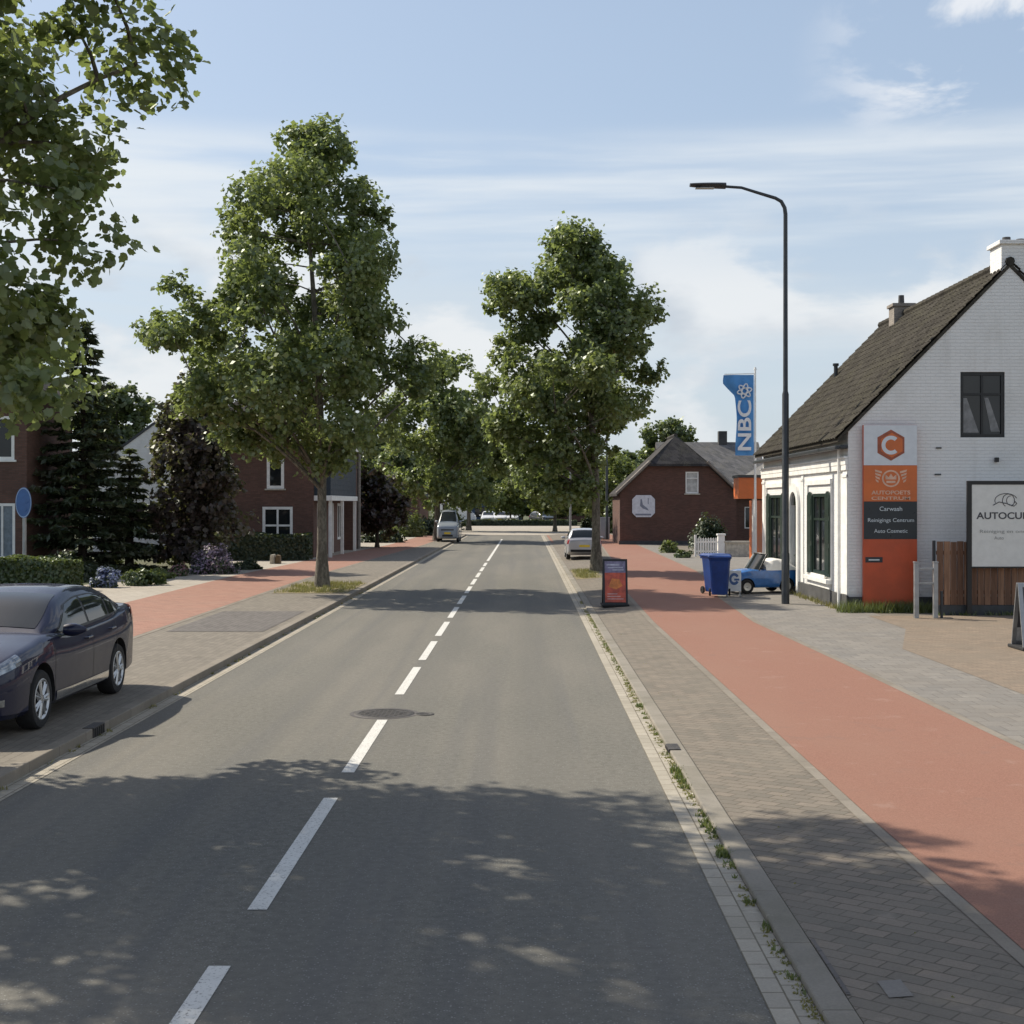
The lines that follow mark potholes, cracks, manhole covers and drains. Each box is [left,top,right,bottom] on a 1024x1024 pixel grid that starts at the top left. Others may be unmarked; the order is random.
manhole cover [350,708,419,719]
